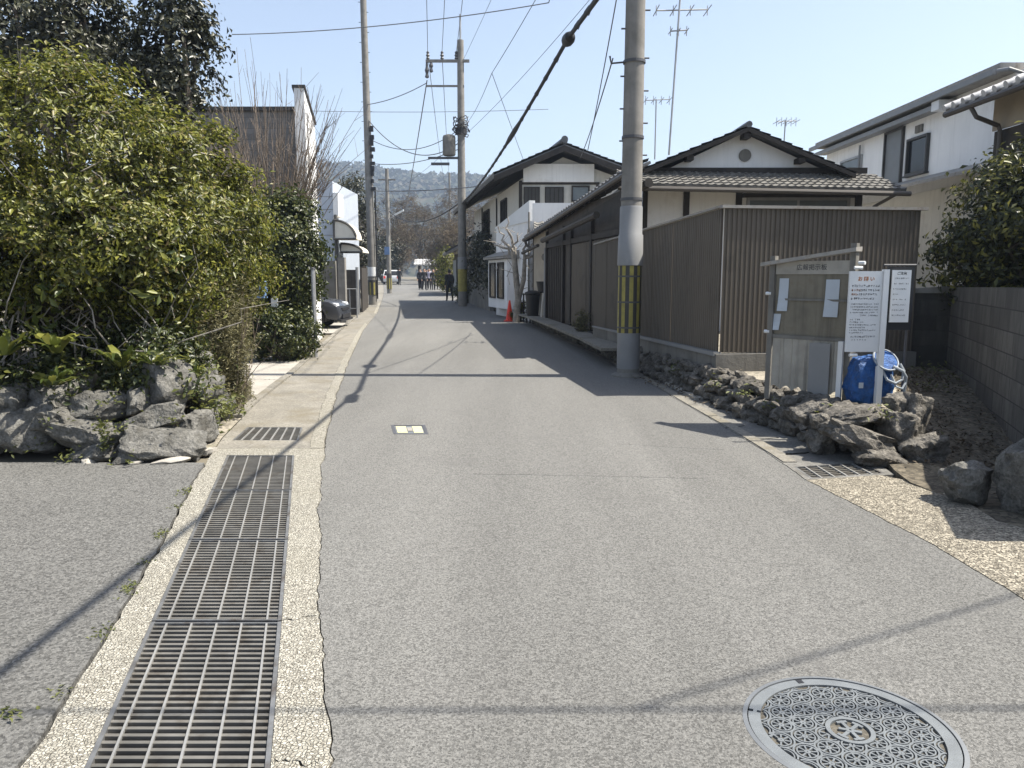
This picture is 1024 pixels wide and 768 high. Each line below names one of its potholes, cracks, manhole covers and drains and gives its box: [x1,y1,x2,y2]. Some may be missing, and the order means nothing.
drain grate [189,490,292,540]
manhole cover [743,676,970,768]
drain grate [795,463,883,478]
drain grate [84,621,282,768]
drain grate [152,539,288,622]
drain grate [212,455,294,490]
drain grate [233,427,302,440]
